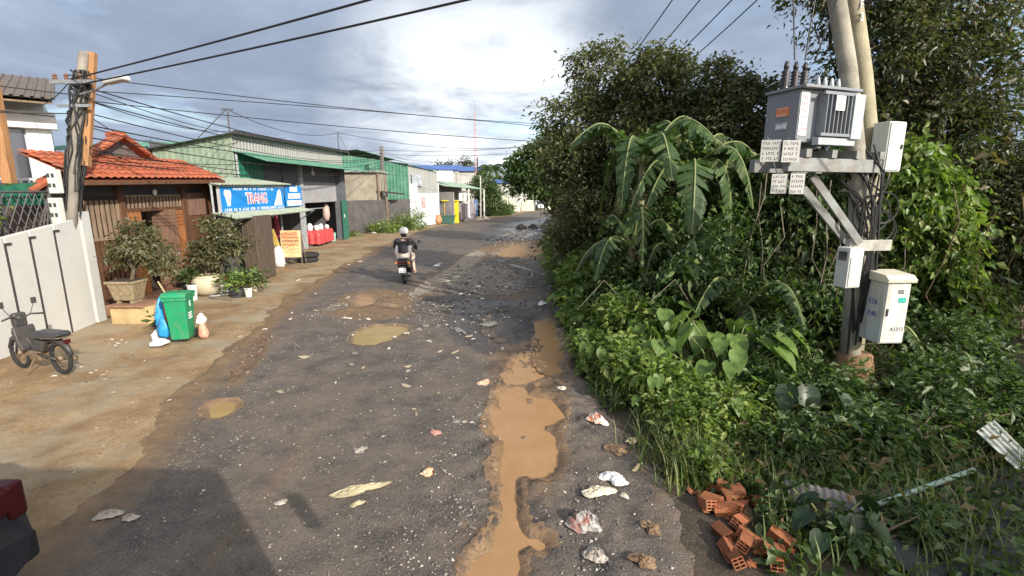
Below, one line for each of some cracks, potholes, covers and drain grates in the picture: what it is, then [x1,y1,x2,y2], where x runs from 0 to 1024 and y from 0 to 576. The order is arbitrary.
pothole [196,397,245,420]
pothole [347,294,383,307]
pothole [347,323,413,346]
